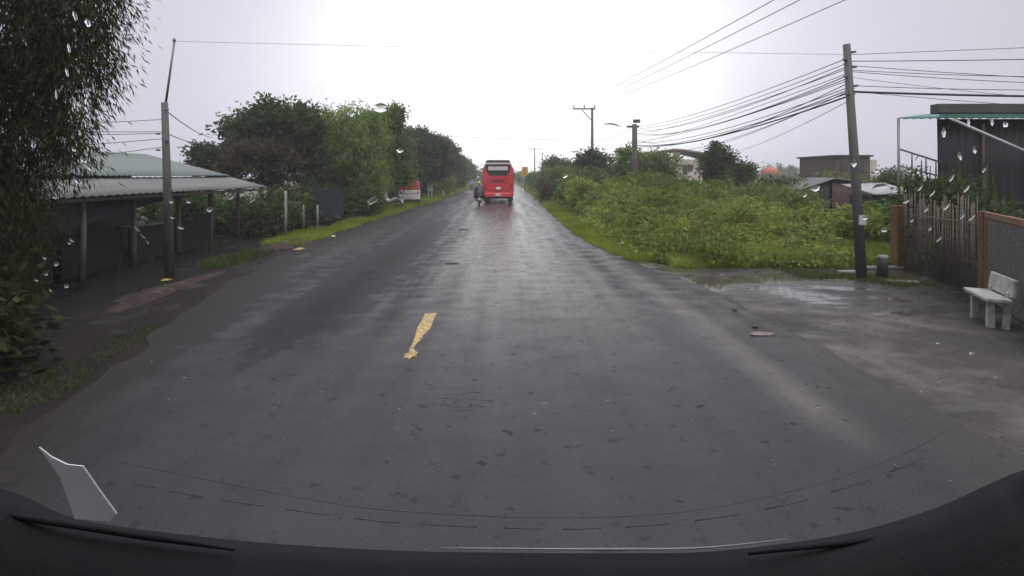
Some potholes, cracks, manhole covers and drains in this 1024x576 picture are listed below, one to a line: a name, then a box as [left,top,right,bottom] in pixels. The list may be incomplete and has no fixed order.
crack [437,388,512,411]
